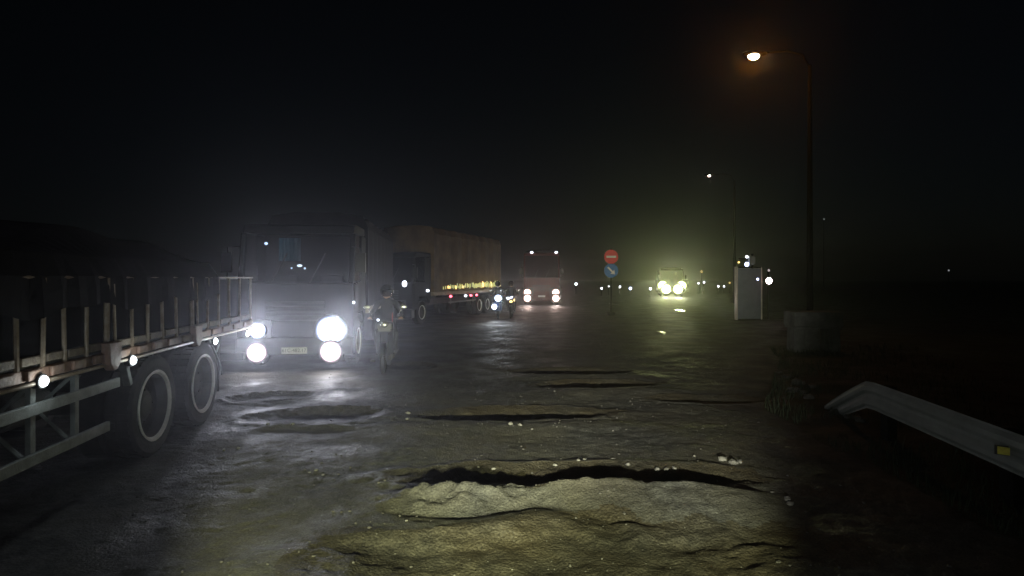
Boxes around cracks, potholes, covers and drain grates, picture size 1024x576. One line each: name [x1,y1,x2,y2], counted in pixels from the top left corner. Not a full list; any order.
pothole [396,404,629,422]
pothole [222,390,315,404]
pothole [237,405,388,425]
pothole [379,459,775,488]
